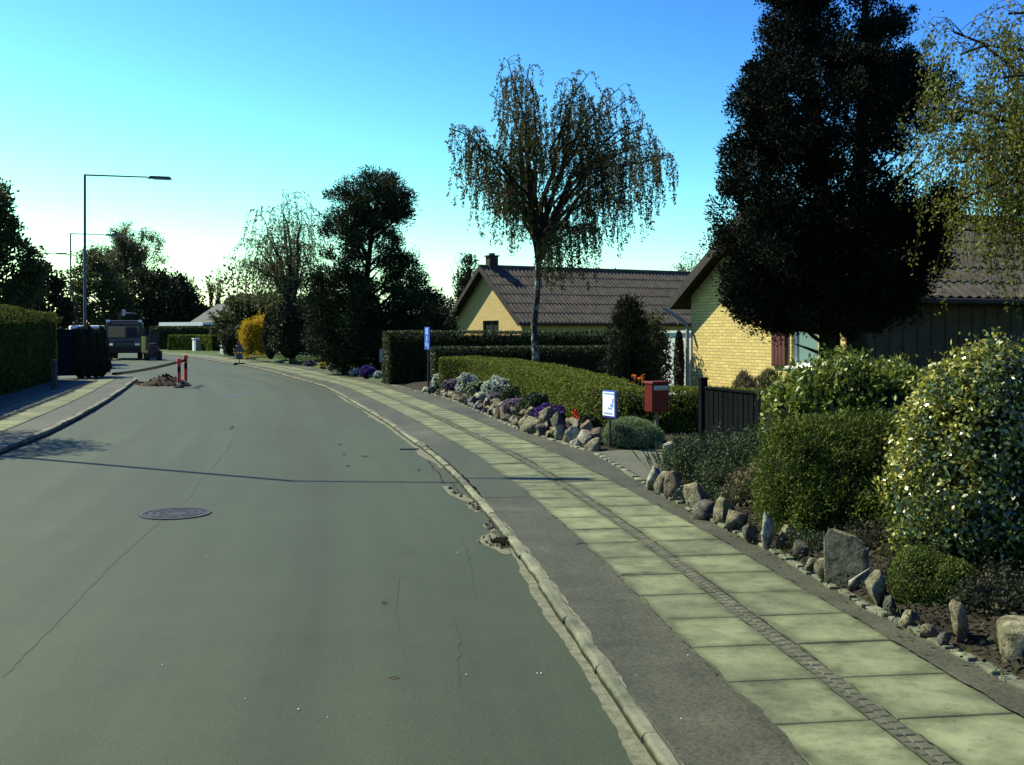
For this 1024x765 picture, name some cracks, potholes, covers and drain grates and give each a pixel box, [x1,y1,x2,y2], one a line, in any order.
crack [461,538,477,600]
manhole cover [139,507,211,520]
pothole [443,486,476,504]
crack [454,621,462,687]
pothole [477,533,512,555]
